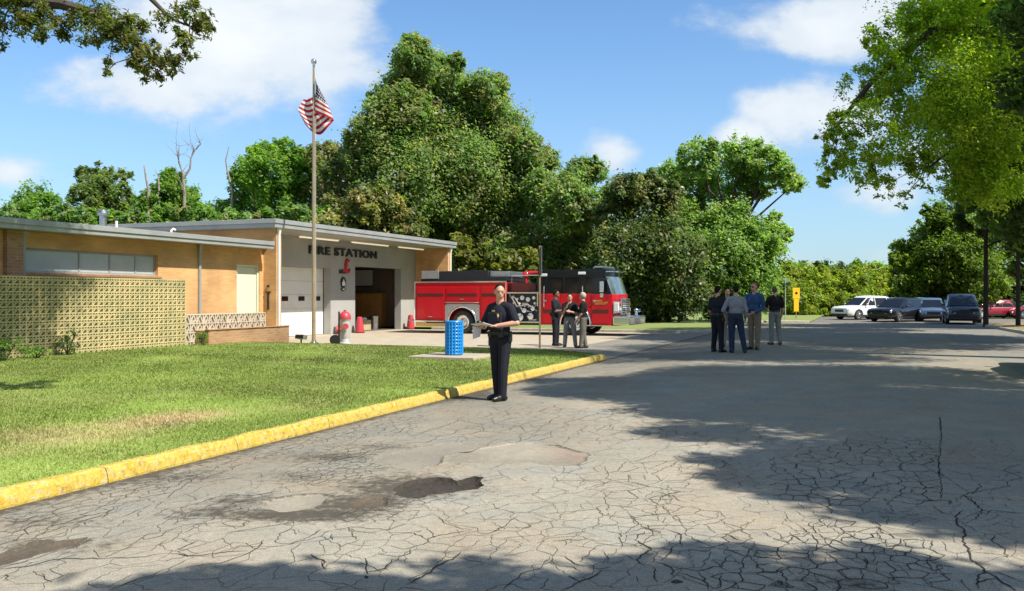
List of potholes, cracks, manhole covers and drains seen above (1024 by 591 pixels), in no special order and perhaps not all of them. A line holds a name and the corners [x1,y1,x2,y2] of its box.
pothole [393,476,484,499]
crack [0,391,1024,591]
